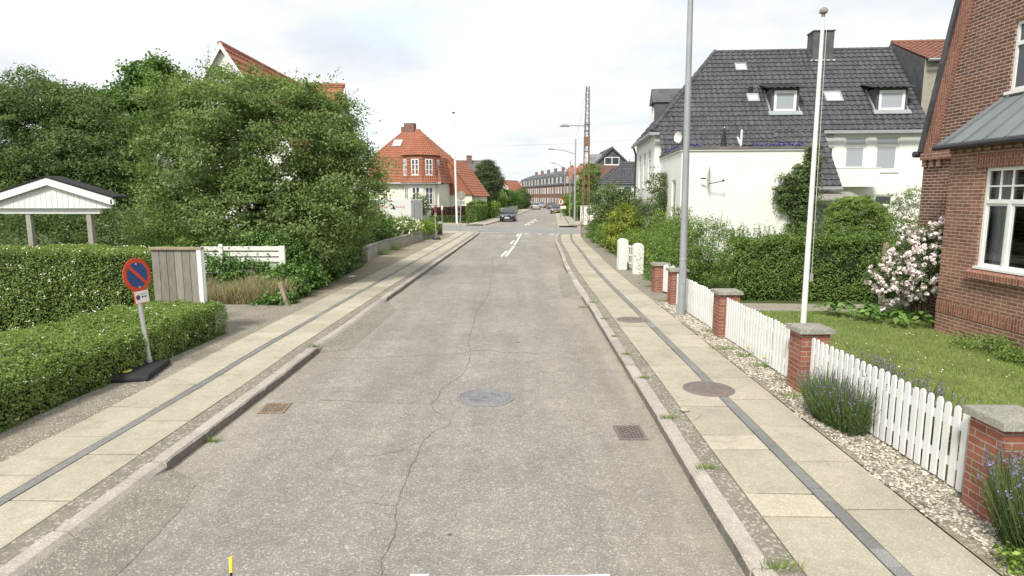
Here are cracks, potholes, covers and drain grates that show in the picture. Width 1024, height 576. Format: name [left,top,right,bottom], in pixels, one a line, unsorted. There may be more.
crack [332,260,581,576]
drain grate [613,425,648,440]
drain grate [257,402,292,414]
manhole cover [456,388,514,407]
manhole cover [683,381,735,398]
